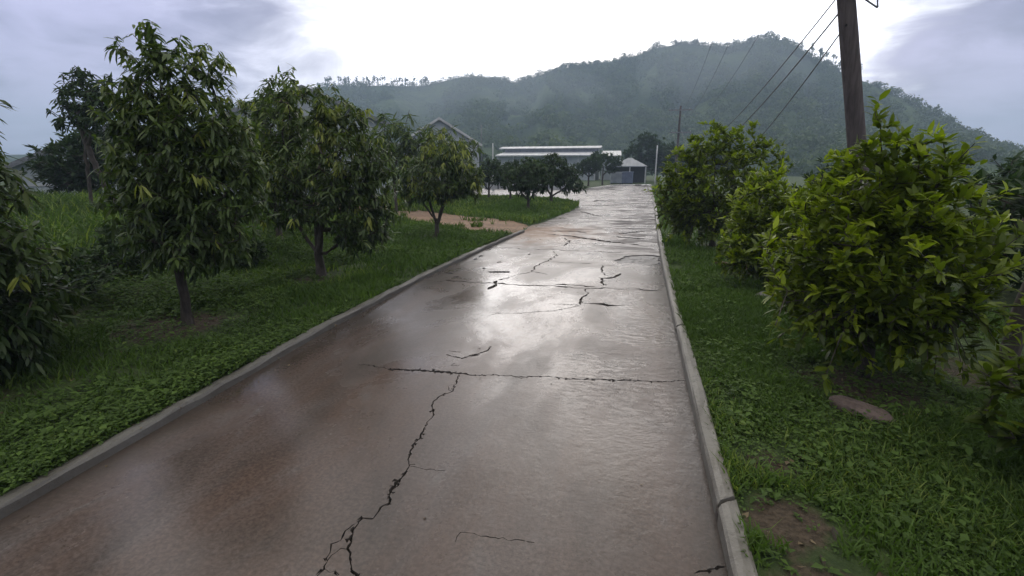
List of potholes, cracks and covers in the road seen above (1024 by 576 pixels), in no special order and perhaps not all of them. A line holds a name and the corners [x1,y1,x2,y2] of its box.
crack [316,346,685,576]
crack [447,189,658,317]
crack [694,565,725,574]
